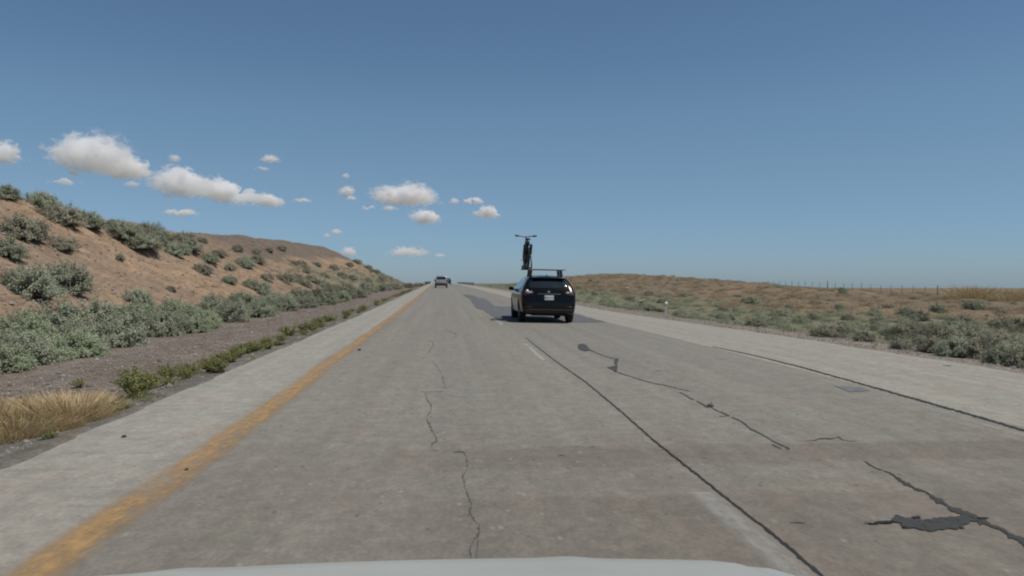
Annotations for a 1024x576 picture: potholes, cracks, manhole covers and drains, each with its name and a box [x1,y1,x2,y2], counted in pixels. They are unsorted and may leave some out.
crack [421,329,480,557]
